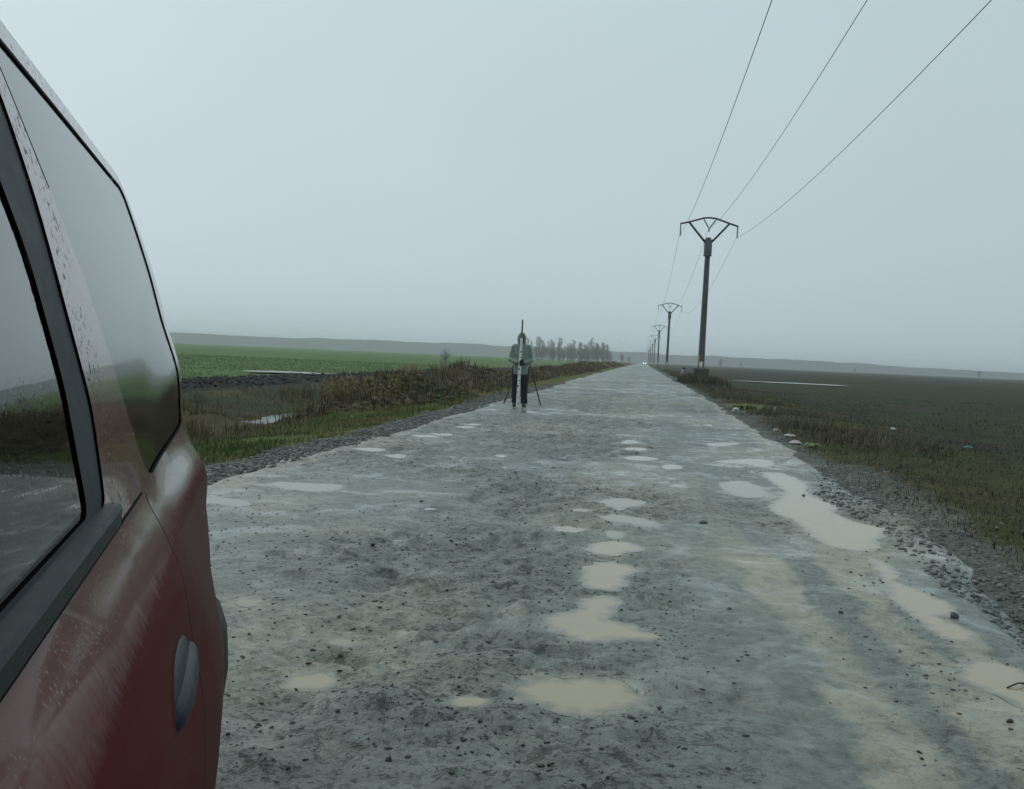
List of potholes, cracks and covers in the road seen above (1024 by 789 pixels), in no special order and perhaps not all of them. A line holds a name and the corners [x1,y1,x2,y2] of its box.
pothole [583,540,646,556]
pothole [541,595,662,642]
pothole [598,498,647,511]
pothole [953,659,1024,713]
pothole [762,472,888,552]
pothole [511,676,644,717]
pothole [577,561,644,592]
pothole [448,695,488,707]
pothole [277,672,338,691]
pothole [272,482,343,492]
pothole [868,556,980,642]
pothole [718,481,768,498]
